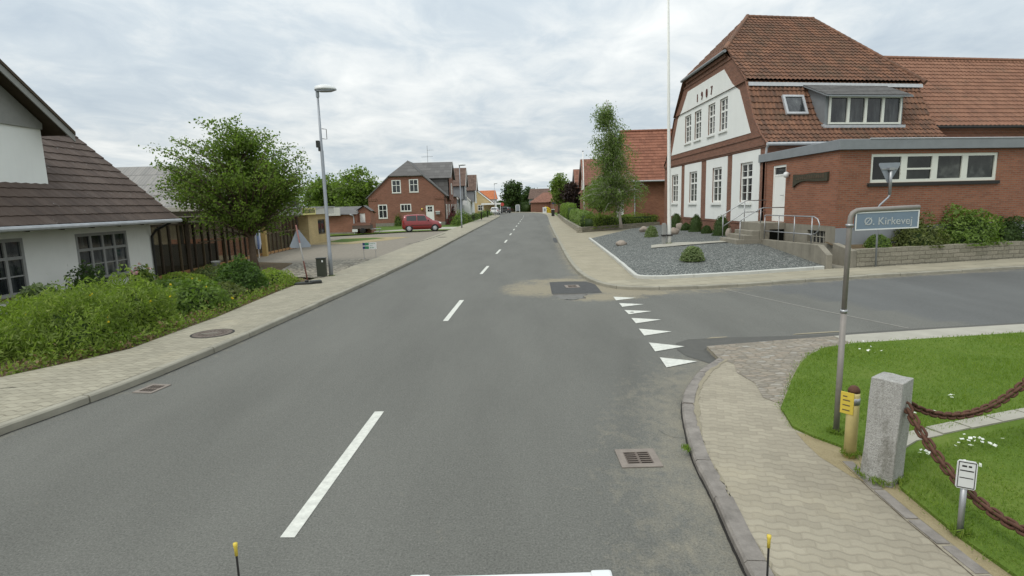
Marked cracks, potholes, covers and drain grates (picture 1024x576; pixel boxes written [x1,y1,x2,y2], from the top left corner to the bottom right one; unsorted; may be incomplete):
manhole cover [190,329,235,338]
drain grate [132,384,172,393]
drain grate [614,448,663,468]
